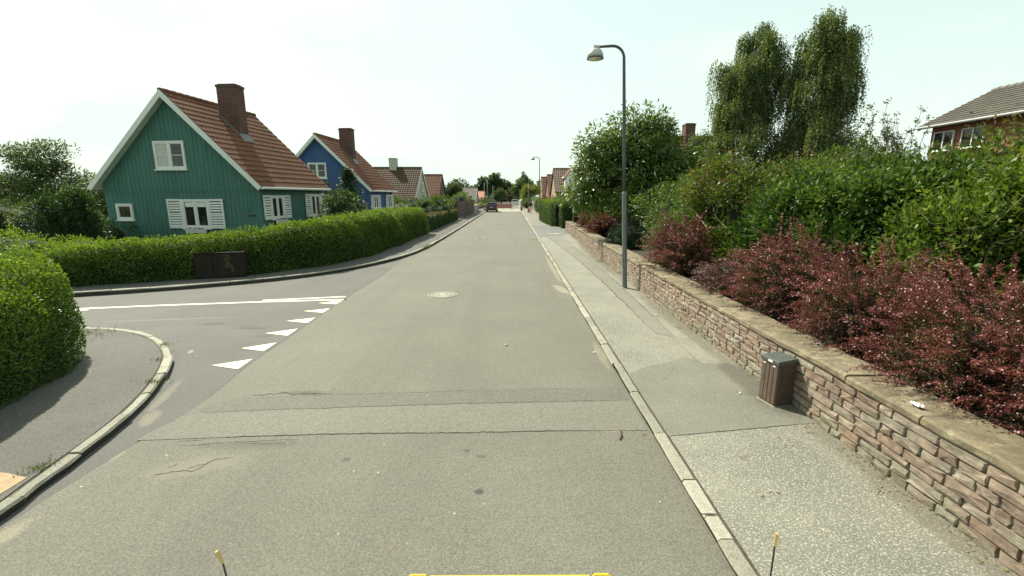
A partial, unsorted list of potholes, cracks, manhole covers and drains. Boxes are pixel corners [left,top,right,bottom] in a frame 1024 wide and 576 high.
crack [155,439,299,477]
